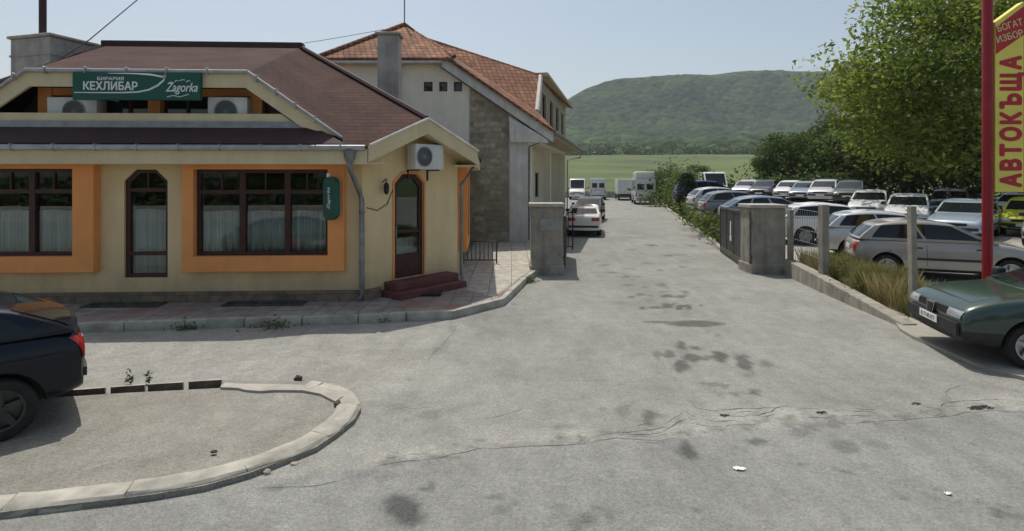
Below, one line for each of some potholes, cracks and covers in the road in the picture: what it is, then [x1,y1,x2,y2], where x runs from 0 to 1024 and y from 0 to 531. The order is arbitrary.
crack [362,398,1010,469]
